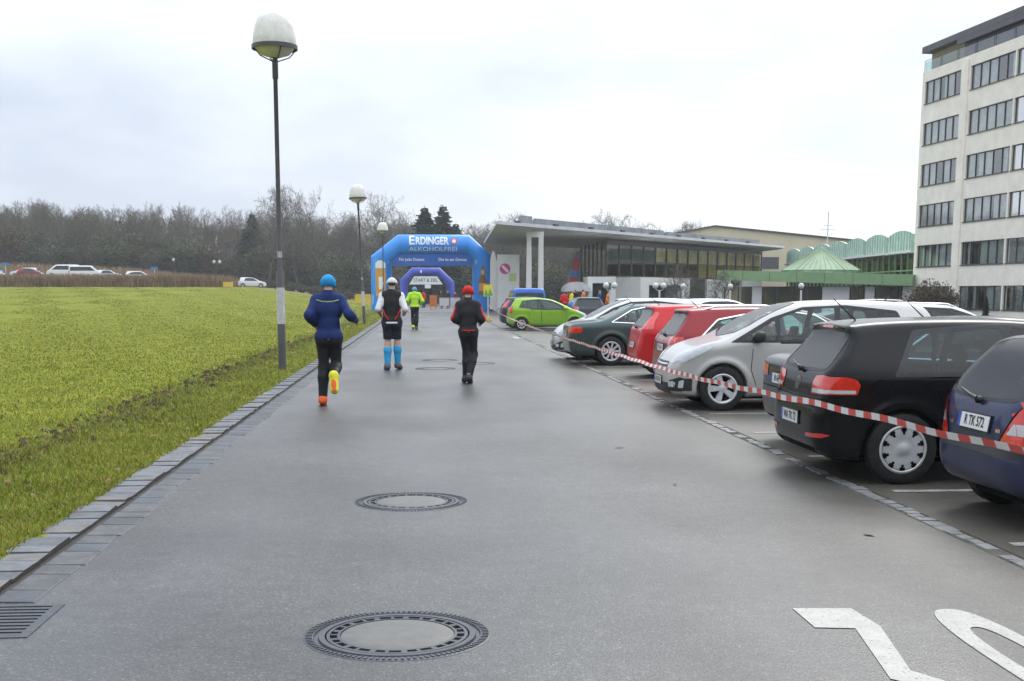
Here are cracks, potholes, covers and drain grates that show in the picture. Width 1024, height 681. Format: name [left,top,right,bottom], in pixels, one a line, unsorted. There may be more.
manhole cover [354,492,469,511]
manhole cover [303,610,491,662]
drain grate [0,604,65,638]
